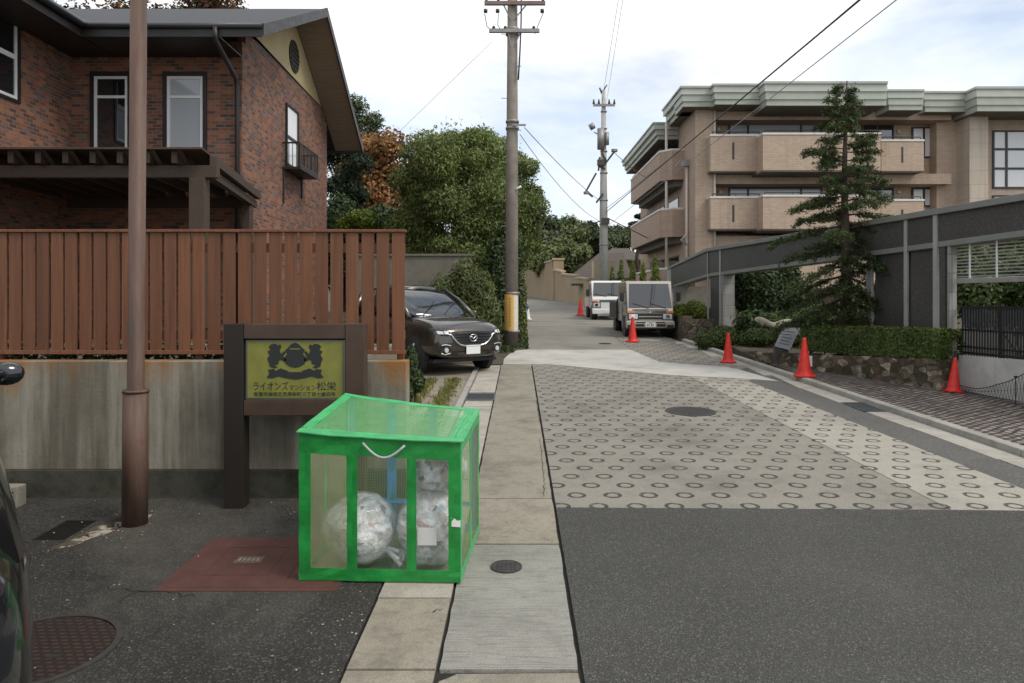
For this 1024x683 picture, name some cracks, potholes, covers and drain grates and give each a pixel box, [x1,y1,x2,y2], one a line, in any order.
manhole cover [665,406,716,416]
manhole cover [154,537,347,592]
manhole cover [491,560,522,574]
drain grate [32,520,97,540]
manhole cover [31,613,123,683]
drain grate [465,393,496,402]
drain grate [841,402,887,412]
